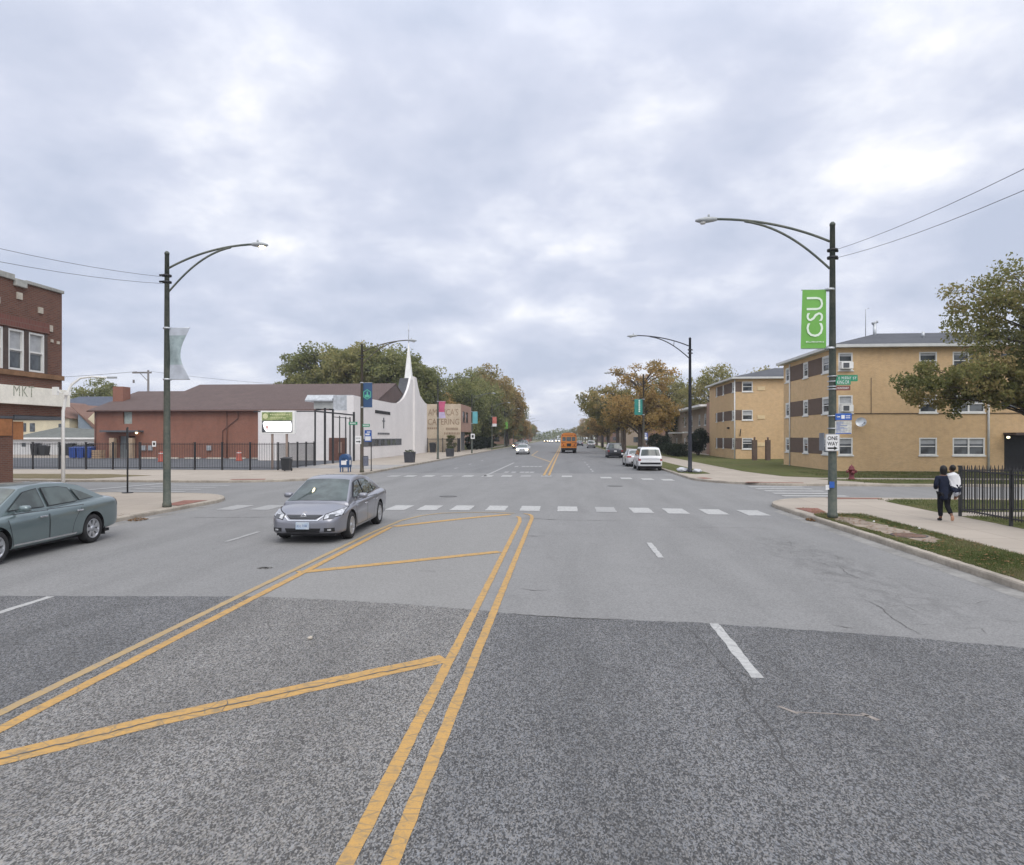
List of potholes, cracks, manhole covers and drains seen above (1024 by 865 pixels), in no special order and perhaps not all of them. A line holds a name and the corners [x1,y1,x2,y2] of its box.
crack [685,626,812,791]
crack [785,542,1018,633]
